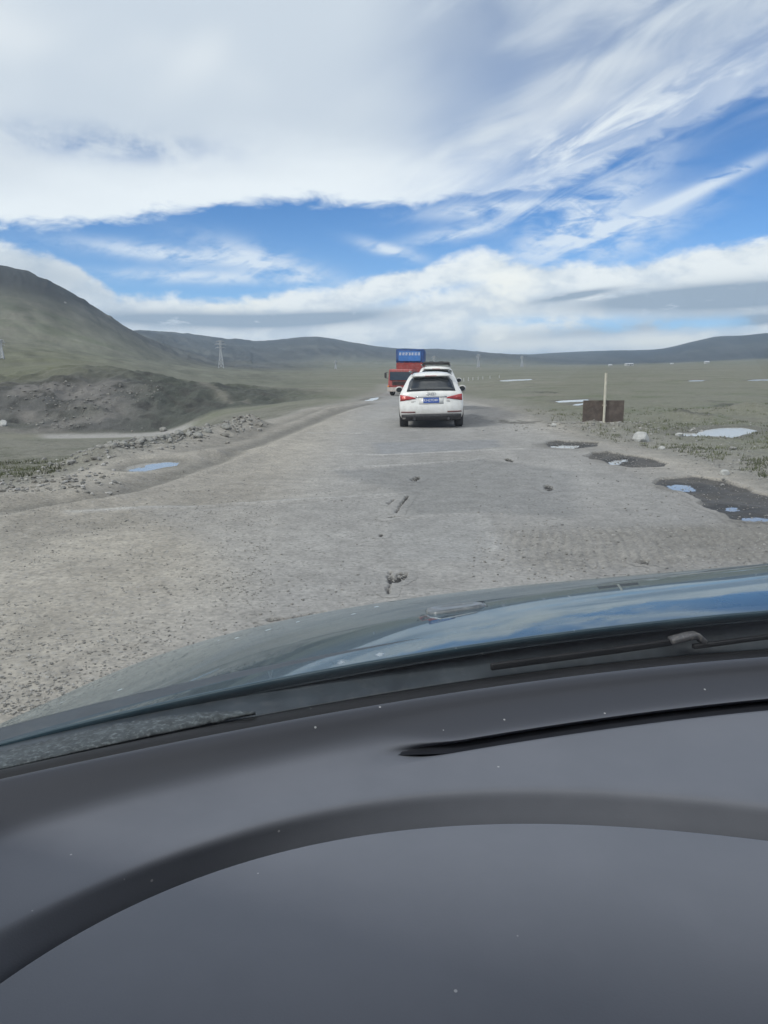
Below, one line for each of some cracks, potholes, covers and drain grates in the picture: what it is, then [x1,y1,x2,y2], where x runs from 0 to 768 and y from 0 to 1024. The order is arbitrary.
pothole [376,568,418,598]
pothole [644,474,768,524]
pothole [401,474,429,482]
pothole [573,450,680,469]
pothole [533,439,612,450]
